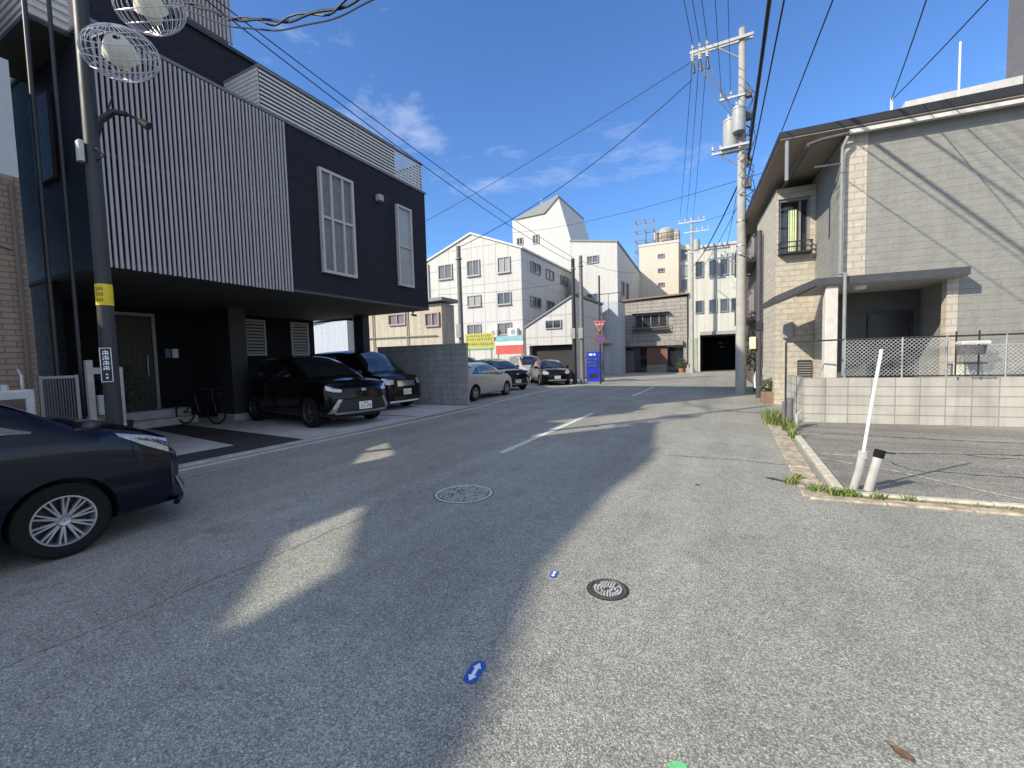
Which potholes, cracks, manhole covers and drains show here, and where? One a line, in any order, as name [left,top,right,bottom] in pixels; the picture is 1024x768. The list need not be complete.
manhole cover [587,579,629,601]
manhole cover [434,485,494,504]
